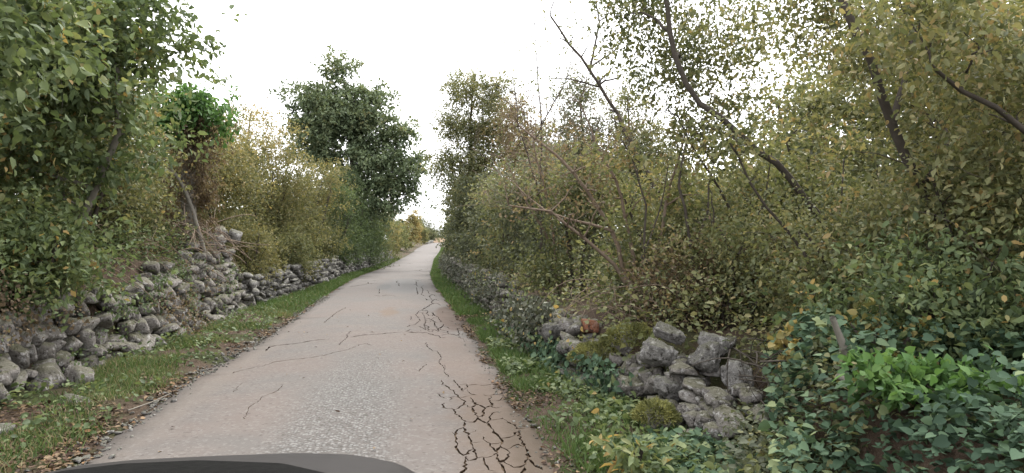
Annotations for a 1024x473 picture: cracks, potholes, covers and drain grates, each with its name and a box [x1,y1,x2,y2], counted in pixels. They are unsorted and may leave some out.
crack [232,263,543,473]
